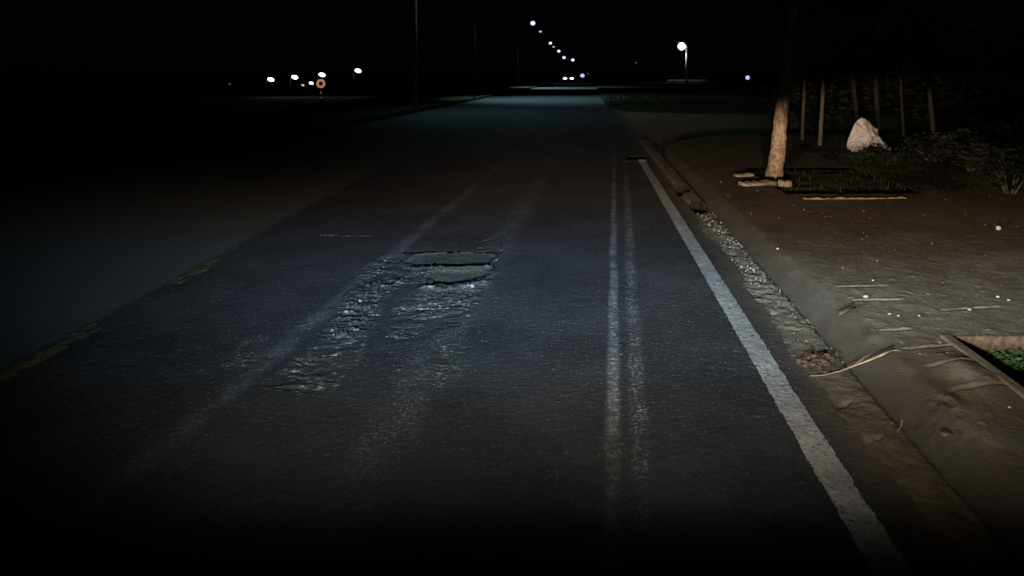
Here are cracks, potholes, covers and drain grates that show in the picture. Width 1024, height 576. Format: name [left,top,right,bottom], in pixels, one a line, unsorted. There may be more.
pothole [403,251,497,267]
crack [284,236,503,392]
pothole [424,268,493,285]
